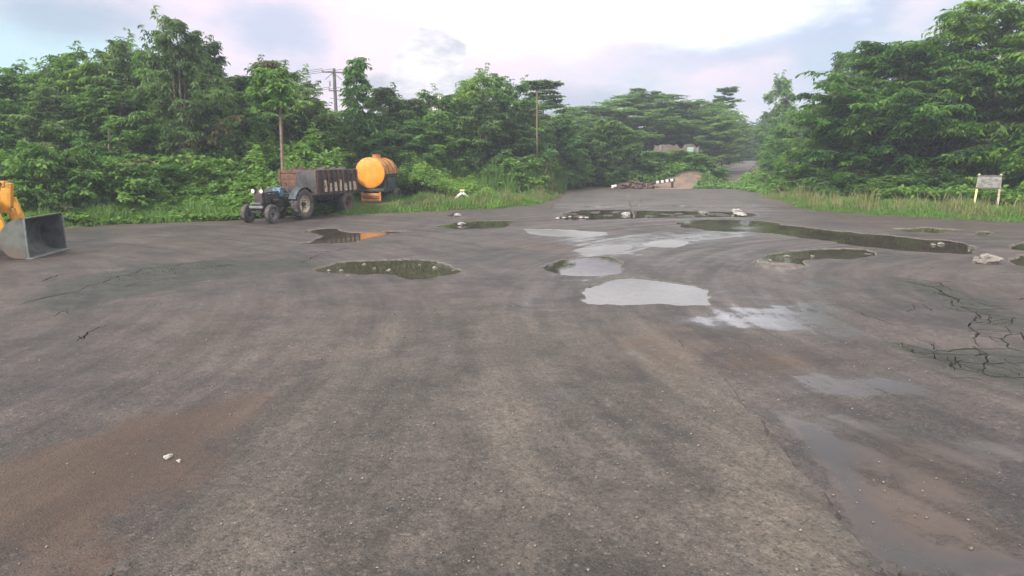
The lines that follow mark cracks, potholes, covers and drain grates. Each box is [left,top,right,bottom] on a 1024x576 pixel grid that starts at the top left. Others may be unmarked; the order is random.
crack [885,266,1024,382]
pothole [540,256,624,276]
pothole [750,248,877,270]
pothole [436,220,515,229]
pothole [298,228,406,244]
pothole [555,209,759,220]
pothole [312,258,464,280]
pothole [675,219,977,254]
crack [20,260,271,315]
pothole [579,277,713,306]
